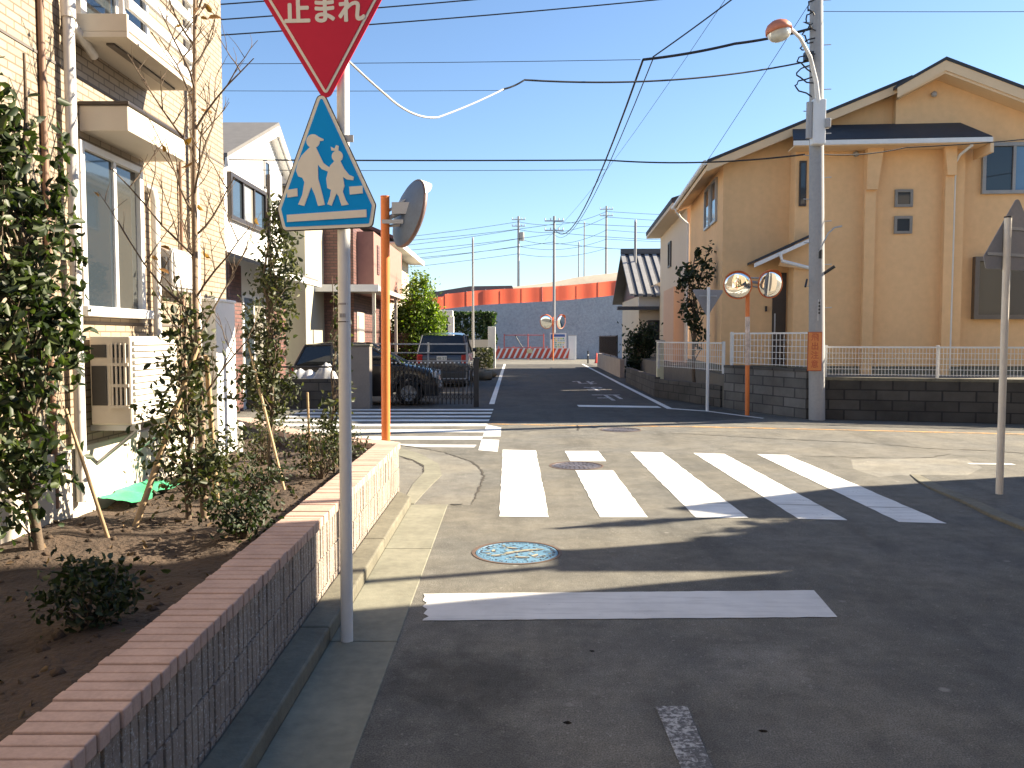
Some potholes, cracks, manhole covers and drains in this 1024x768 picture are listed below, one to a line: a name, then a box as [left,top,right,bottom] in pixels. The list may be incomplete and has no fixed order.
manhole cover [549,461,604,470]
manhole cover [472,541,562,565]
